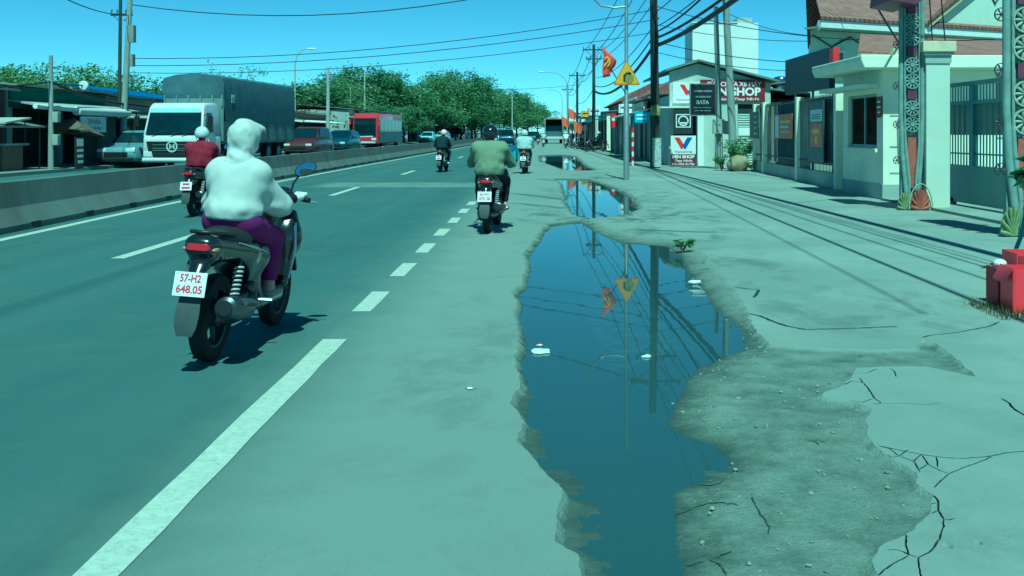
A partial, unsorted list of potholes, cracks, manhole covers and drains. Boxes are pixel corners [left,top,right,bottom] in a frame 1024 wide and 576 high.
crack [845,368,938,405]
crack [674,481,770,576]
crack [878,446,1024,576]
crack [735,287,898,330]
pothole [510,217,976,576]
pothole [551,178,644,218]
crack [922,322,999,338]
pothole [536,154,600,170]
